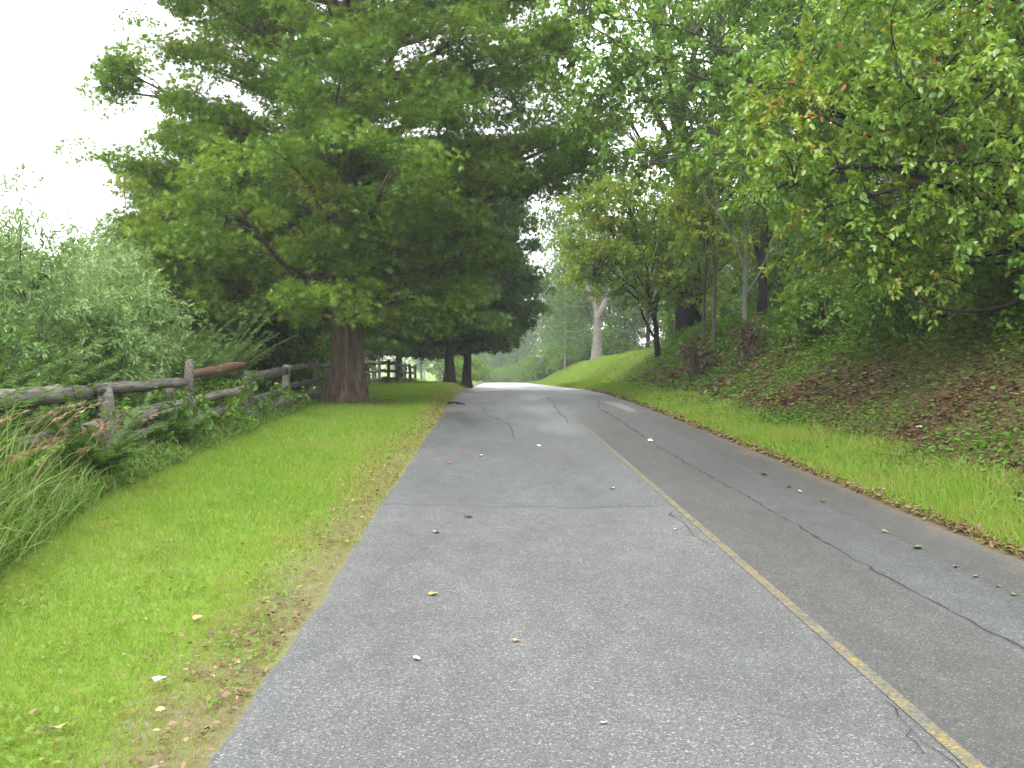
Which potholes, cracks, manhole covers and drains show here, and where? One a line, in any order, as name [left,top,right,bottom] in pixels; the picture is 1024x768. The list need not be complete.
crack [668,512,707,543]
crack [885,700,960,768]
crack [475,405,515,438]
